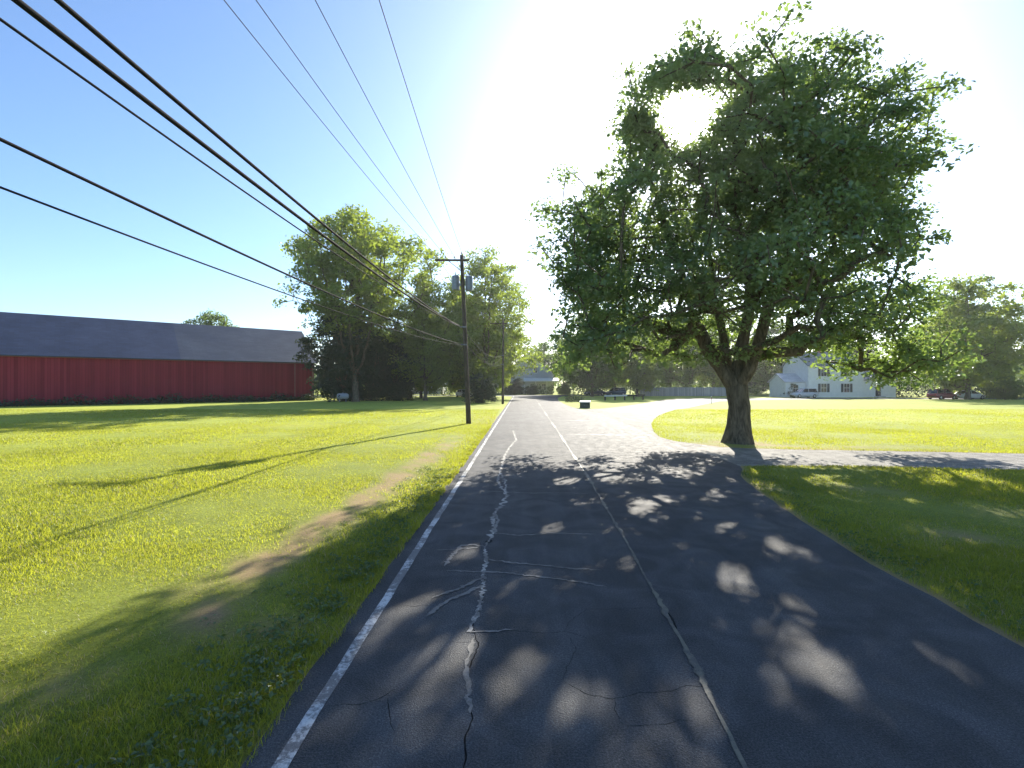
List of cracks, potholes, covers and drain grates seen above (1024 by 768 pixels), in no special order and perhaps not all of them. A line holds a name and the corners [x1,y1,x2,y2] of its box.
crack [411,430,606,768]
crack [337,689,395,733]
crack [563,608,700,726]
